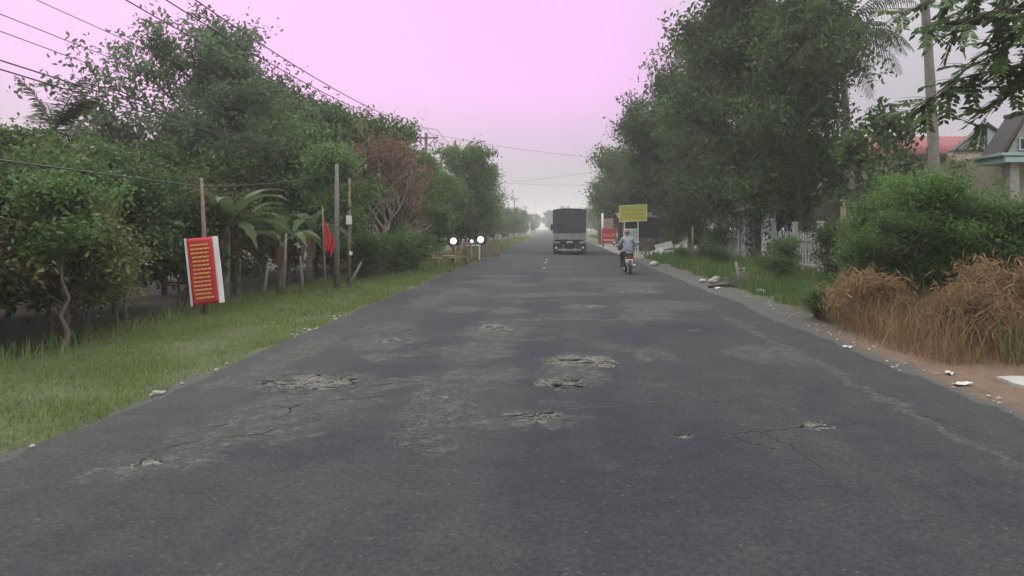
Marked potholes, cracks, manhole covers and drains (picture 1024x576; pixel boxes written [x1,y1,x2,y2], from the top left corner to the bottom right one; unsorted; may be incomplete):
pothole [502,411,565,423]
pothole [256,374,360,390]
pothole [119,458,167,469]
crack [161,372,481,457]
crack [863,389,972,433]
pothole [798,419,838,431]
pothole [542,355,624,368]
pothole [529,378,591,391]
pothole [472,323,513,332]
crack [725,423,856,471]
